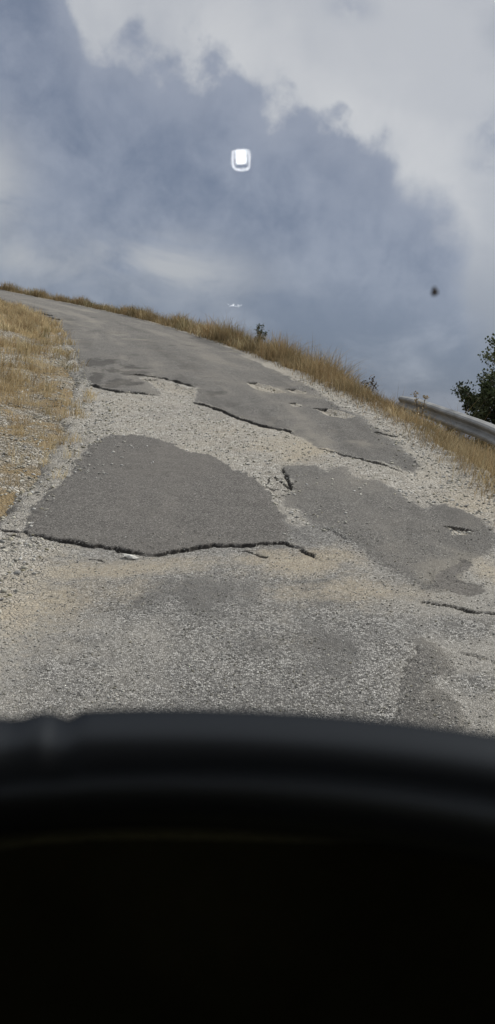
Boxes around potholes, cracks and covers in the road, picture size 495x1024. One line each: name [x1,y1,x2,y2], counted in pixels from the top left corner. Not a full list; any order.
crack [89,373,297,436]
crack [258,470,293,492]
pothole [246,382,287,393]
crack [0,527,349,563]
